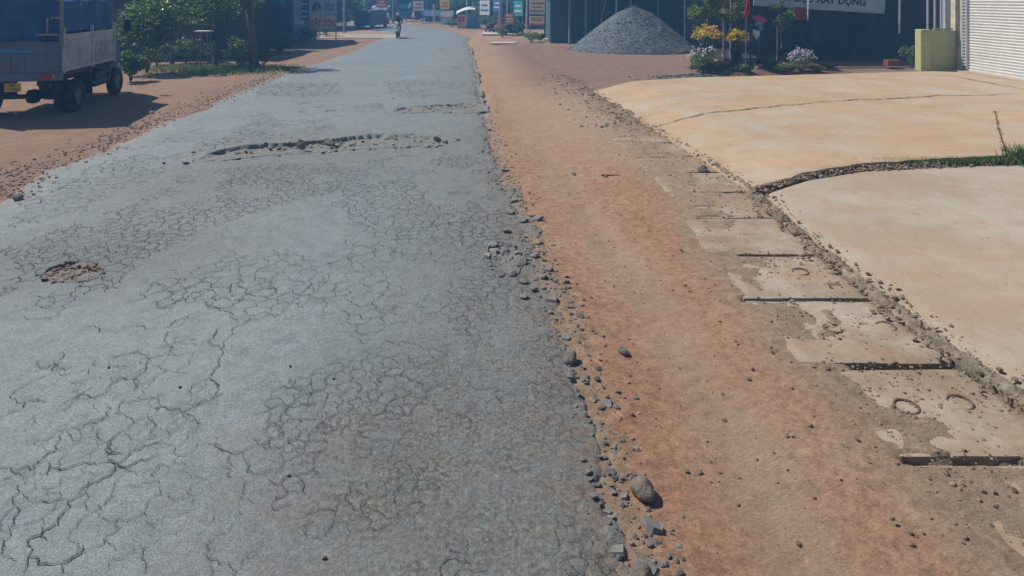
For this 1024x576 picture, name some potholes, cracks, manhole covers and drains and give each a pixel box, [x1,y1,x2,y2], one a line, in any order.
pothole [392,102,497,114]
pothole [36,260,106,283]
crack [12,67,481,227]
crack [0,163,509,576]
crack [391,245,617,576]
crack [647,93,1015,128]
pothole [182,133,460,164]
